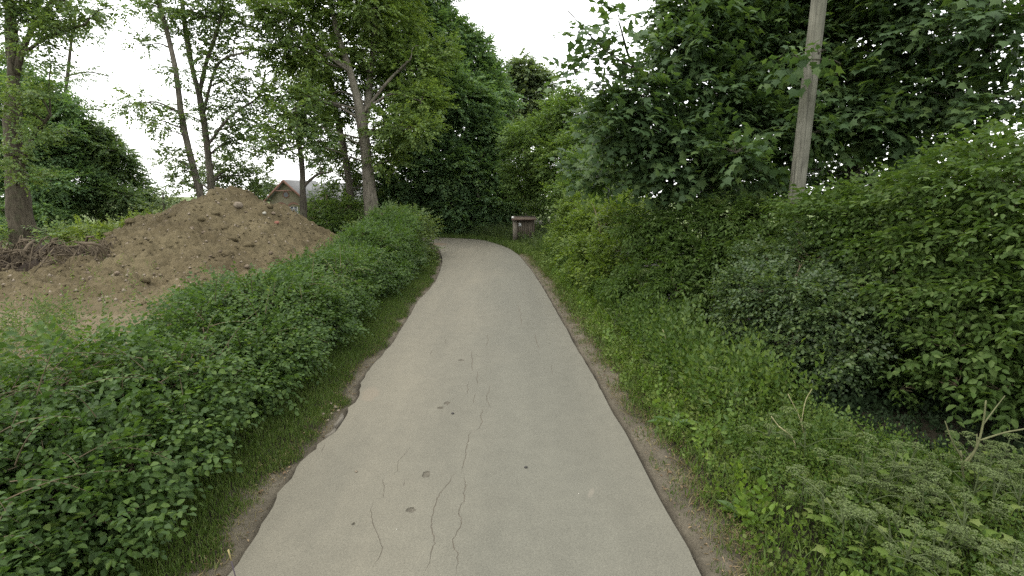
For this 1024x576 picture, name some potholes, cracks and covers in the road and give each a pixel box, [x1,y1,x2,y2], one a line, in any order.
crack [370,454,405,568]
crack [423,334,490,575]
